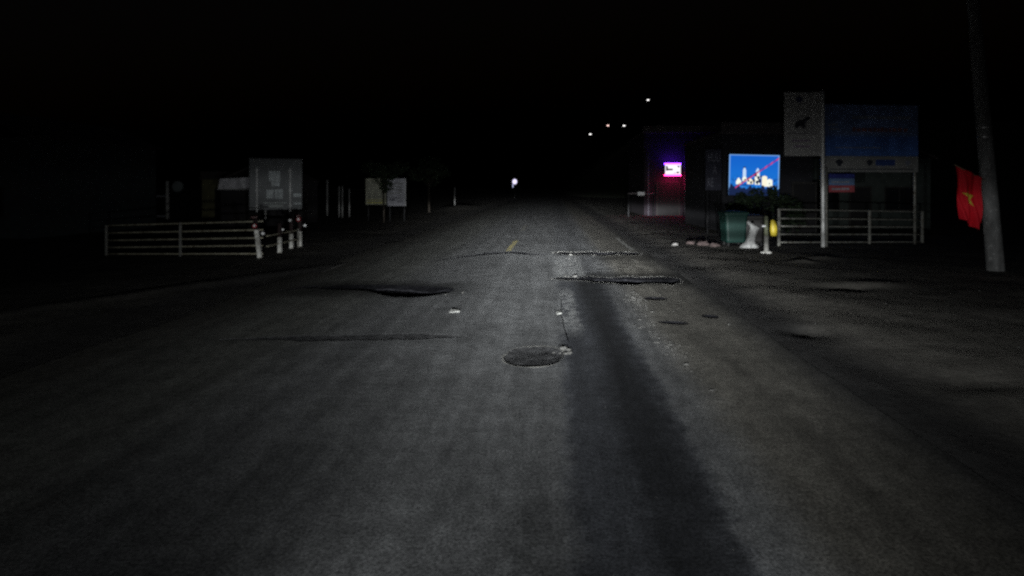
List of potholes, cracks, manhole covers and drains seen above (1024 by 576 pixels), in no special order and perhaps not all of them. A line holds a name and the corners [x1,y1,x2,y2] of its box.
pothole [501,346,572,368]
pothole [318,285,464,298]
pothole [553,276,683,286]
